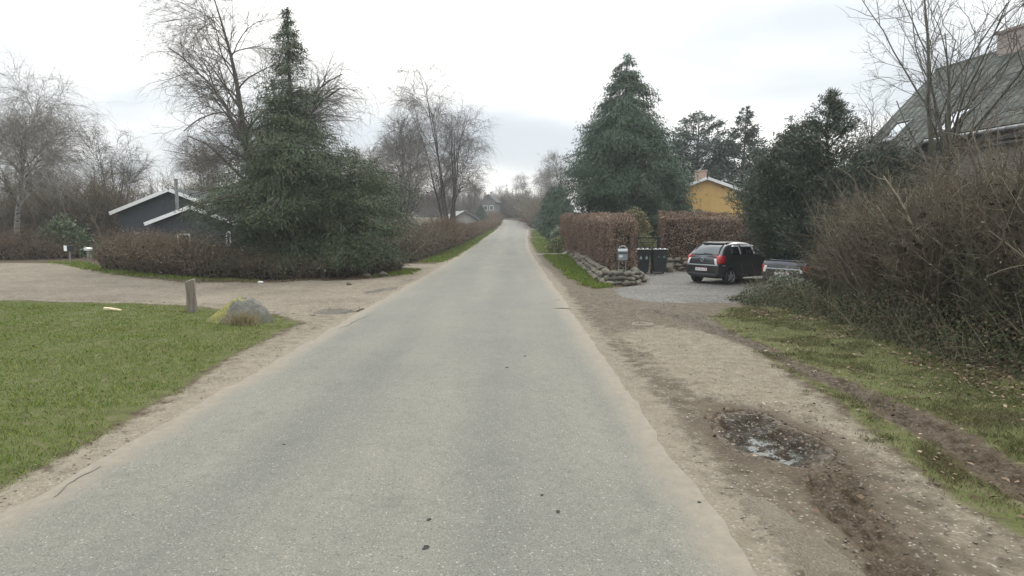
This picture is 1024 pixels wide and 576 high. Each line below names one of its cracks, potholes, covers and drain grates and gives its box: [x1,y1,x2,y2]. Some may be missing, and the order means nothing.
pothole [710,410,836,469]
